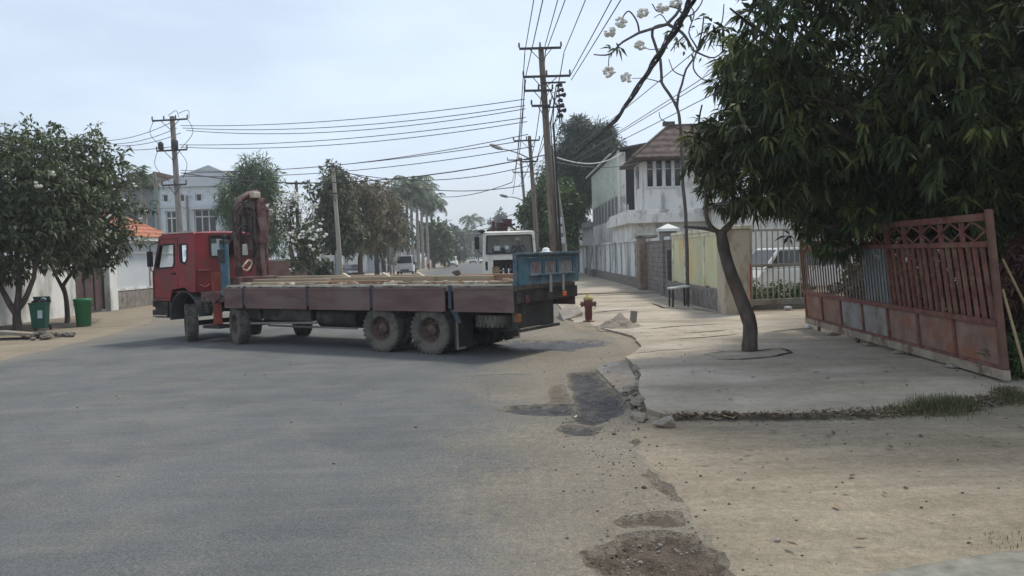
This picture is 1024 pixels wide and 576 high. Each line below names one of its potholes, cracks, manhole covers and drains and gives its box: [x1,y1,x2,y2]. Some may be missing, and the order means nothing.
pothole [612,510,686,528]
pothole [579,530,735,576]
